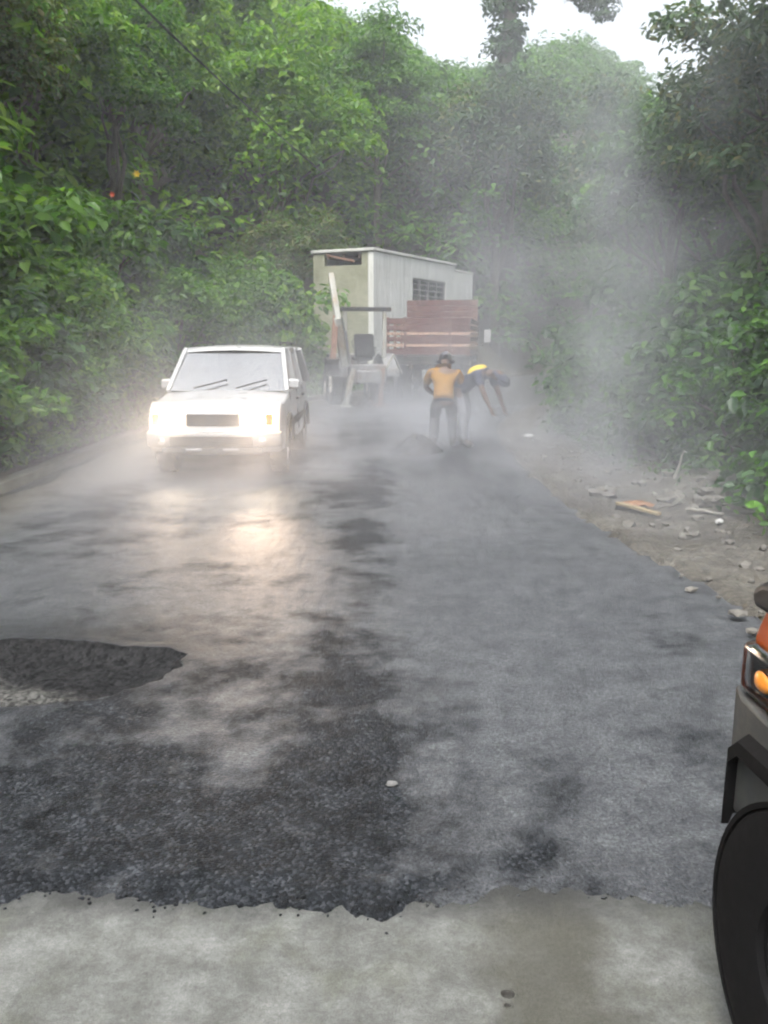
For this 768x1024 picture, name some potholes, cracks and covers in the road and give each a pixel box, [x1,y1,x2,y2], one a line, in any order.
pothole [0,632,223,719]
